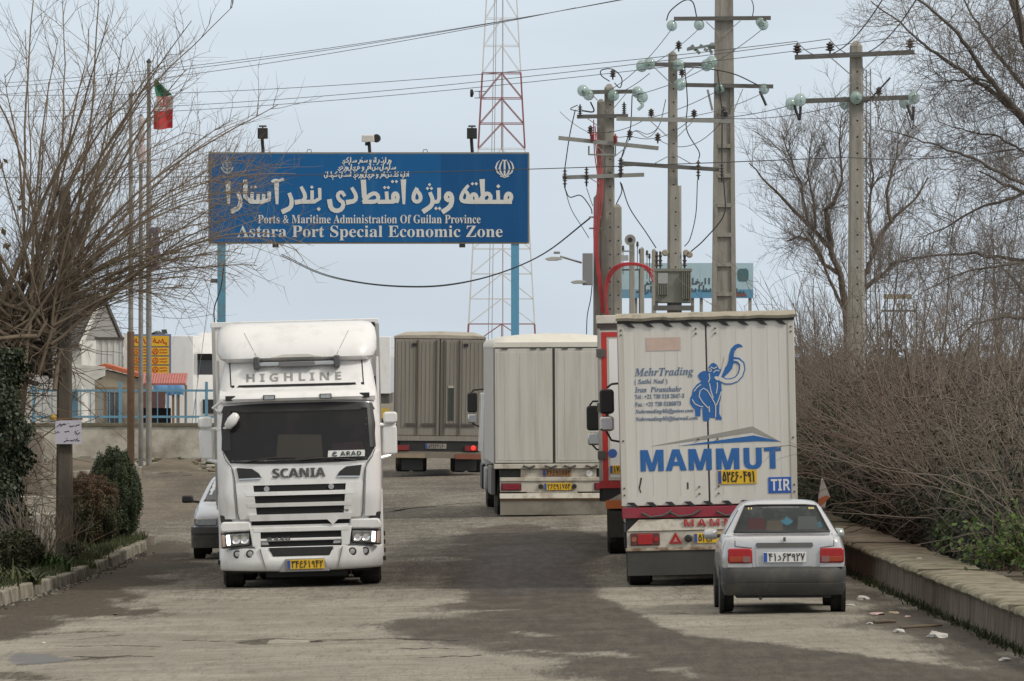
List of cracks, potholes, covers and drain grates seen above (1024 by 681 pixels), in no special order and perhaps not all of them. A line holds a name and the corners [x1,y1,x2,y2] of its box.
crack [389,502,484,512]
